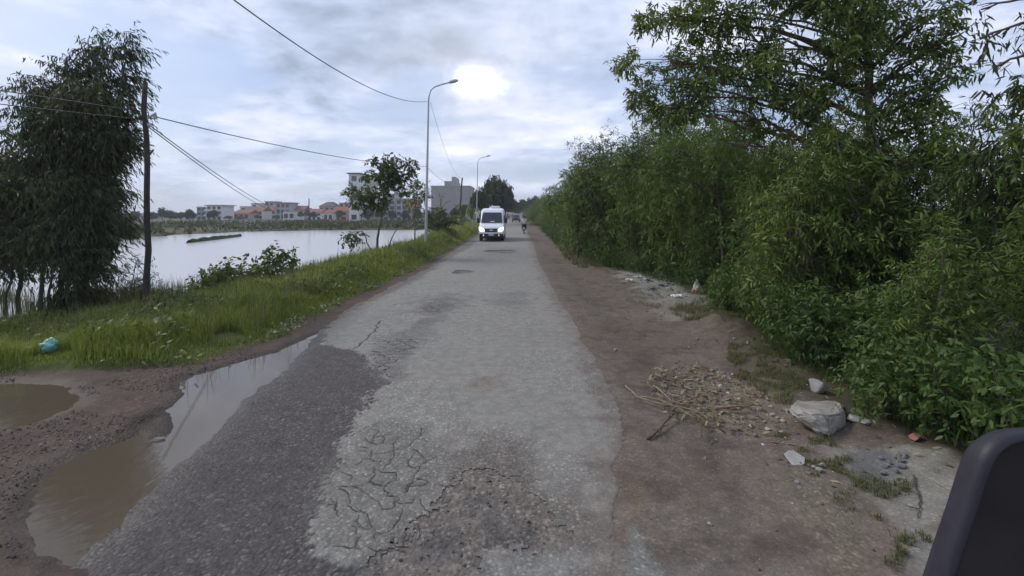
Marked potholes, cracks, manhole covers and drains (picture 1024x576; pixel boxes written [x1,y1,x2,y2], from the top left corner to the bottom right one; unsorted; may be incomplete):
crack [329,424,460,557]
crack [353,304,418,377]
